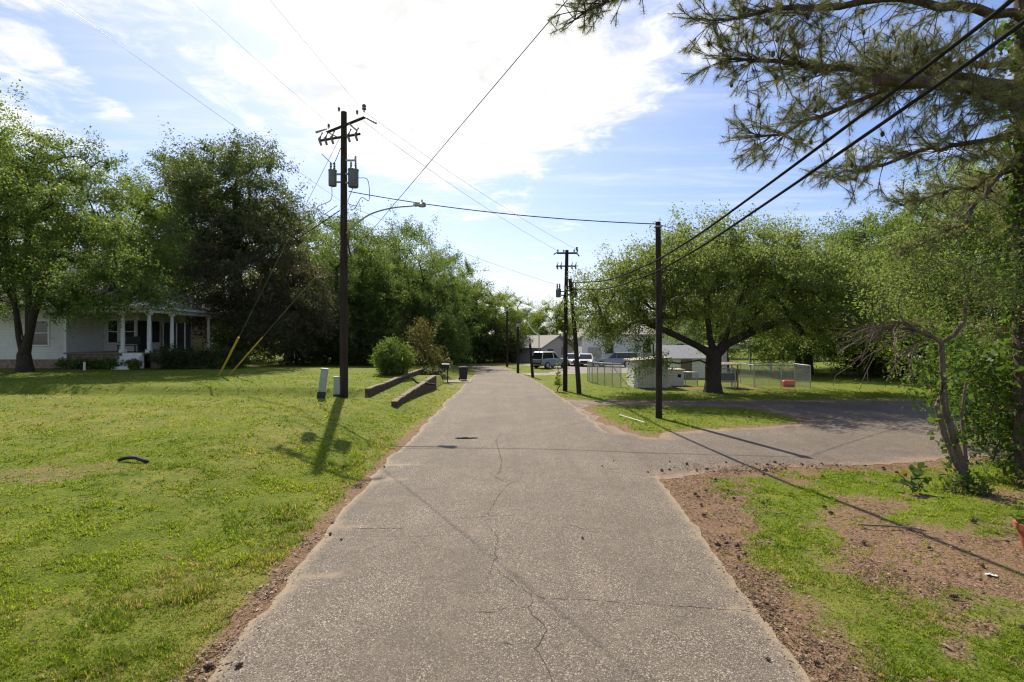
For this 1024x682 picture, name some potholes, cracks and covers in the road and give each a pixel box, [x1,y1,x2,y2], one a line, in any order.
crack [459,441,552,682]
